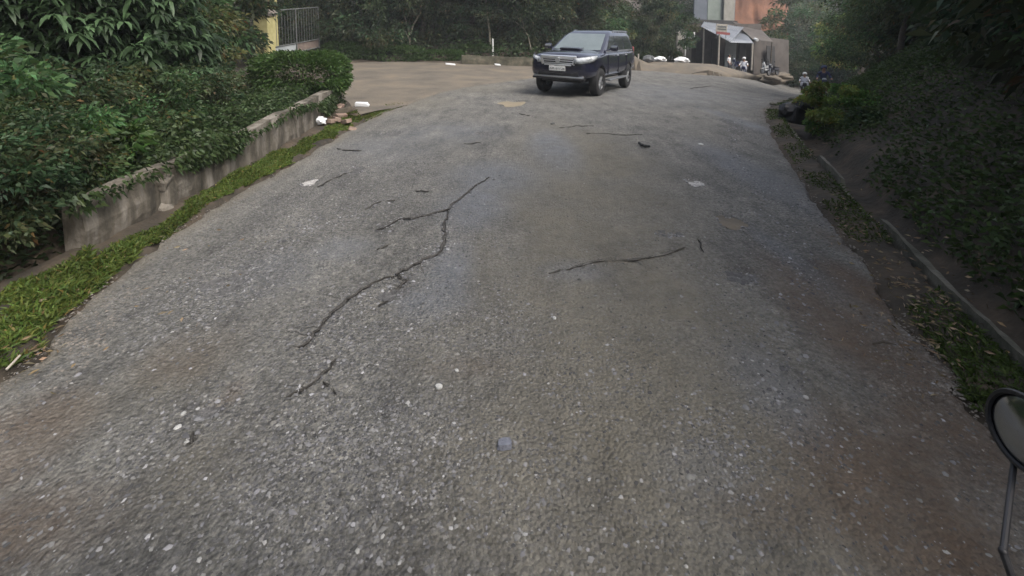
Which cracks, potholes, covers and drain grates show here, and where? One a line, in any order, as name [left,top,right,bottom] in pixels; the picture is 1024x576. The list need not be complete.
crack [549,240,704,274]
crack [276,177,489,398]
